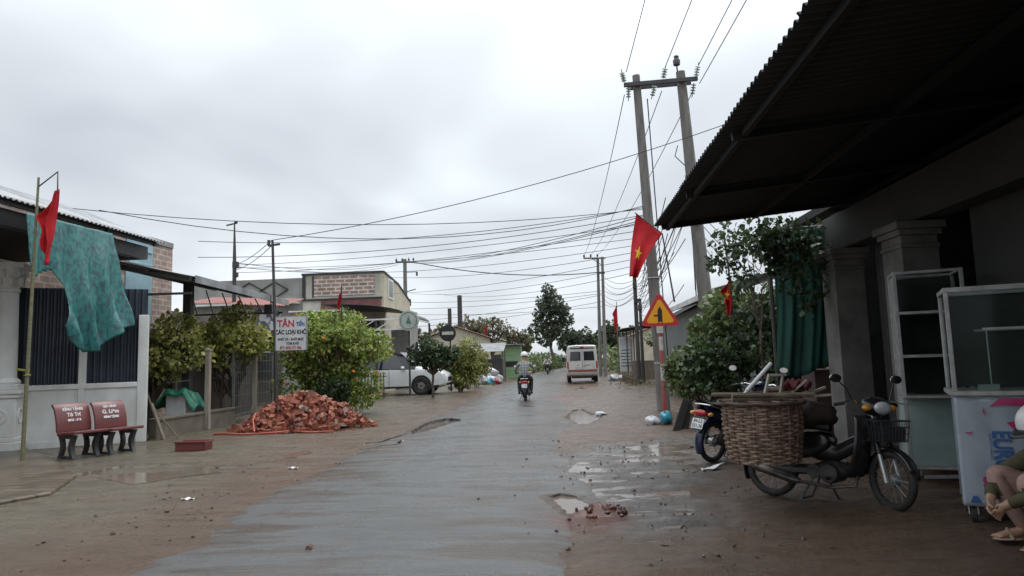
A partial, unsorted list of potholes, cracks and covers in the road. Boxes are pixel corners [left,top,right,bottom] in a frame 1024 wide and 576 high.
pothole [539,492,594,517]
pothole [404,418,466,435]
pothole [560,409,610,425]
